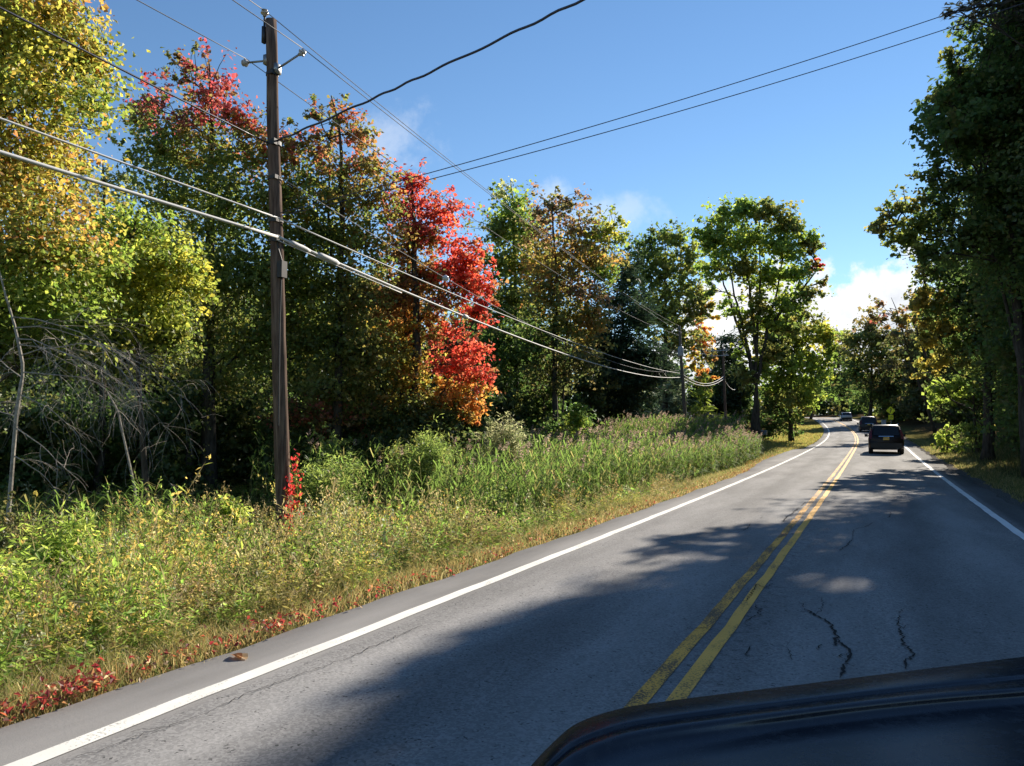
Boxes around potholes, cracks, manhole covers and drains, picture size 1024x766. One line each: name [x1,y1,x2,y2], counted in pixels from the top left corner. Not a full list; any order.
crack [799,599,852,677]
crack [896,610,915,669]
